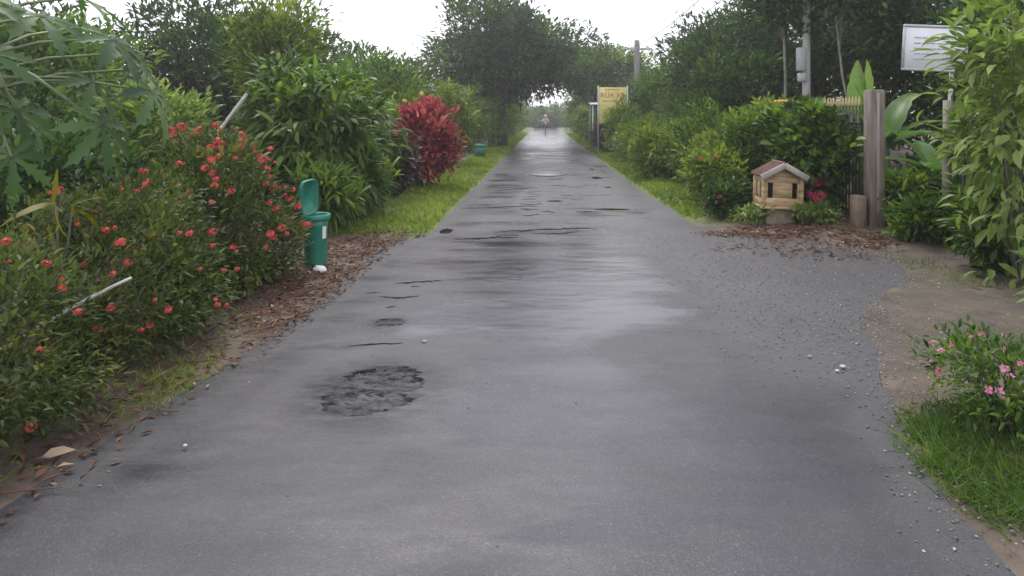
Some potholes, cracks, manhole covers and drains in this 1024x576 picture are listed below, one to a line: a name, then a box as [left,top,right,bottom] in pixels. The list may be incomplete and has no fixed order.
pothole [319,366,425,417]
crack [366,280,440,308]
pothole [370,318,406,327]
crack [453,161,597,240]
